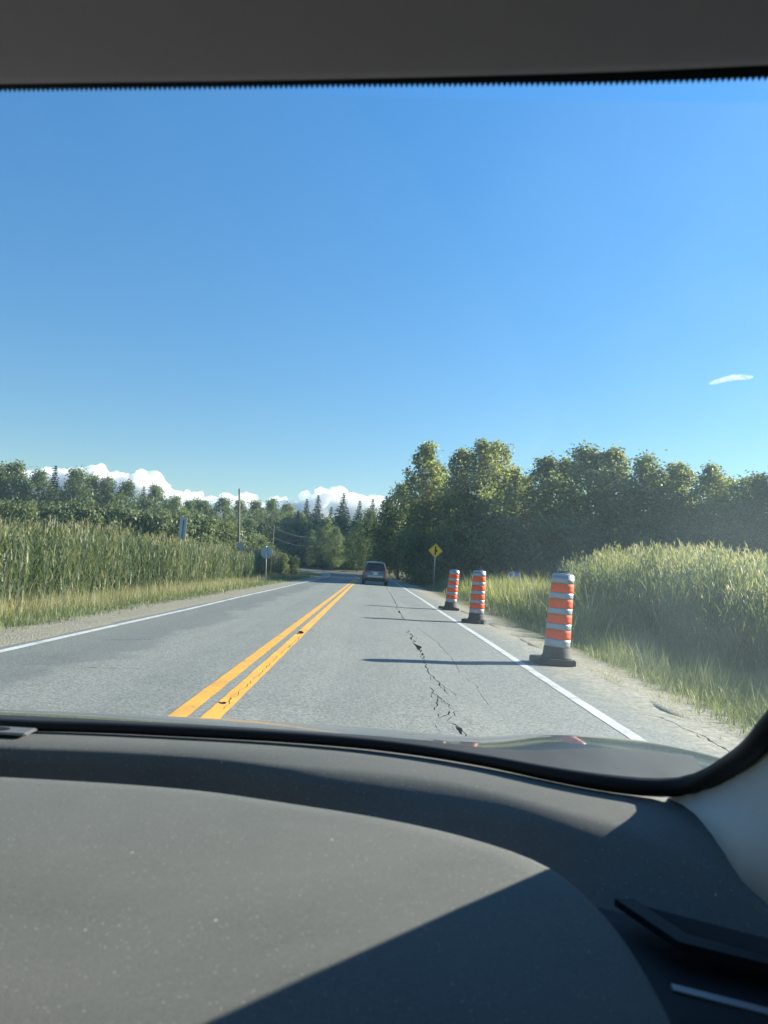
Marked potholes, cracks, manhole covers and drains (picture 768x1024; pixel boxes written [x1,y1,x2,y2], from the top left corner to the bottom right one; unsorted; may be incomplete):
crack [649,715,729,752]
crack [390,593,490,736]
